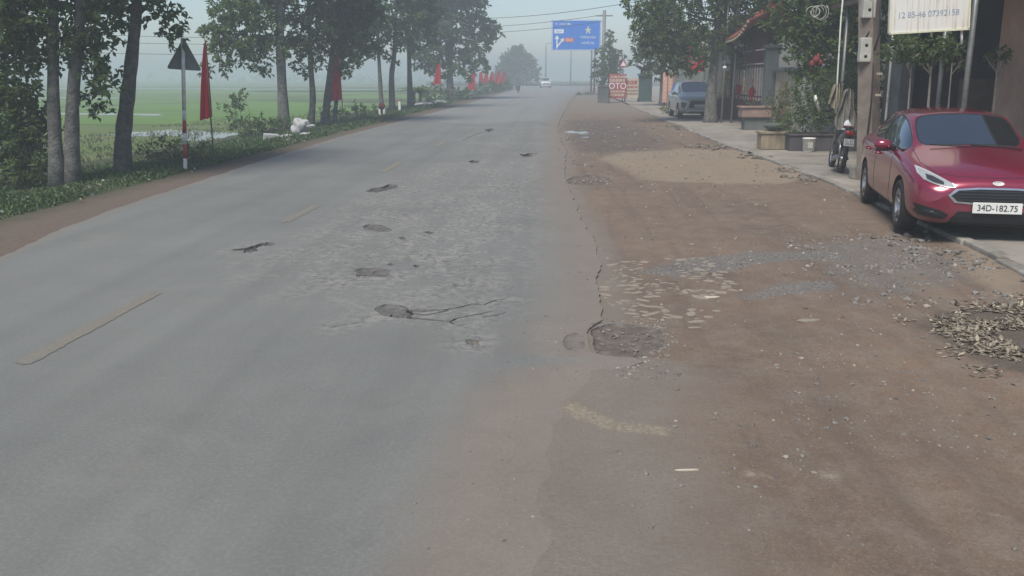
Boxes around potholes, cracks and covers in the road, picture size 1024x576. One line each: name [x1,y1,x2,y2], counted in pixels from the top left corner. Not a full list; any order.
pothole [354,268,392,277]
pothole [232,242,275,253]
pothole [367,184,398,193]
pothole [363,224,392,232]
pothole [591,324,665,359]
pothole [374,304,414,319]
crack [406,299,506,325]
pothole [566,175,613,187]
